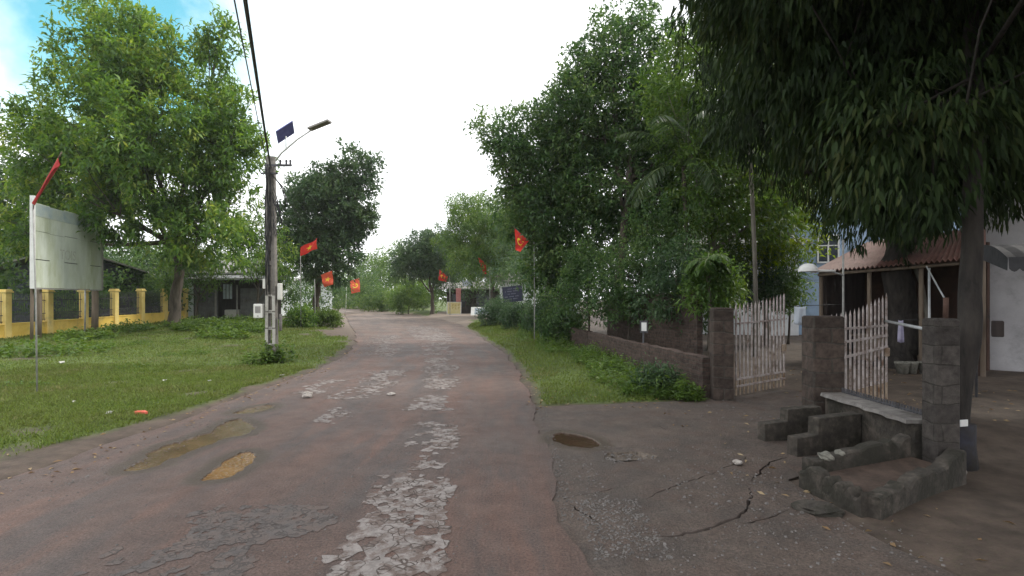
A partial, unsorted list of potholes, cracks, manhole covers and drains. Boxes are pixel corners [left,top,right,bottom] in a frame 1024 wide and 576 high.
pothole [552,432,601,448]
pothole [124,418,256,471]
pothole [200,451,256,481]
crack [640,472,753,537]
